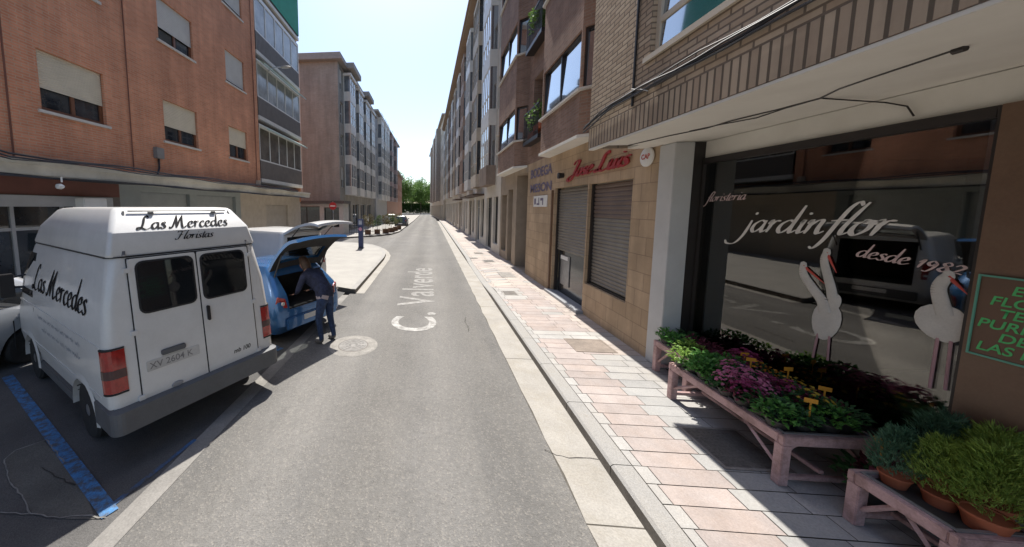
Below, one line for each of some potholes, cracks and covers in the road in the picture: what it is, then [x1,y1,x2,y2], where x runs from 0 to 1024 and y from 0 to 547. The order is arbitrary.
manhole cover [328,336,378,357]
crack [0,439,106,518]
manhole cover [563,338,618,353]
